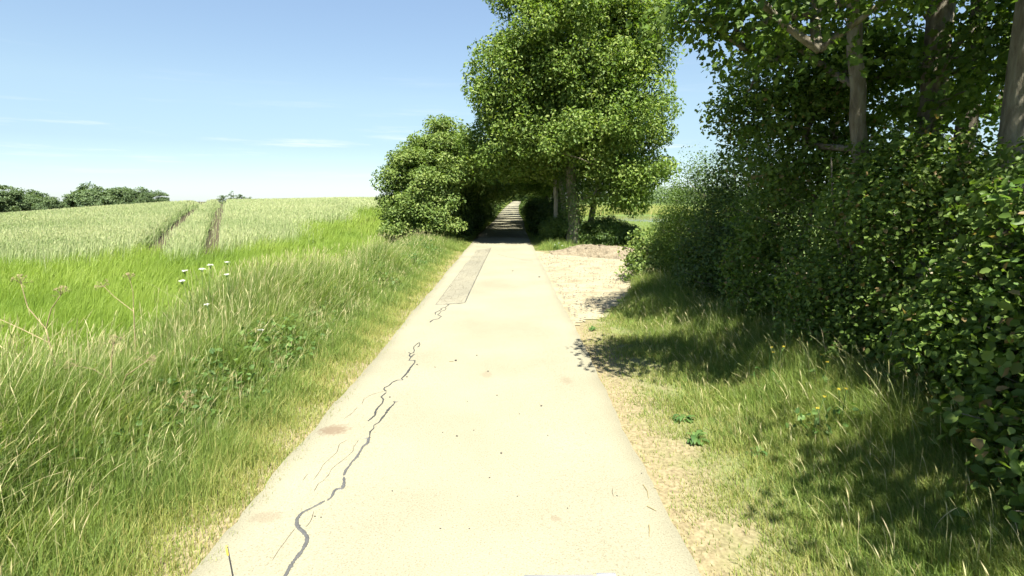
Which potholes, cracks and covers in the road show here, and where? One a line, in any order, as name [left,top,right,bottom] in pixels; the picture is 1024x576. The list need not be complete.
crack [303,441,358,491]
